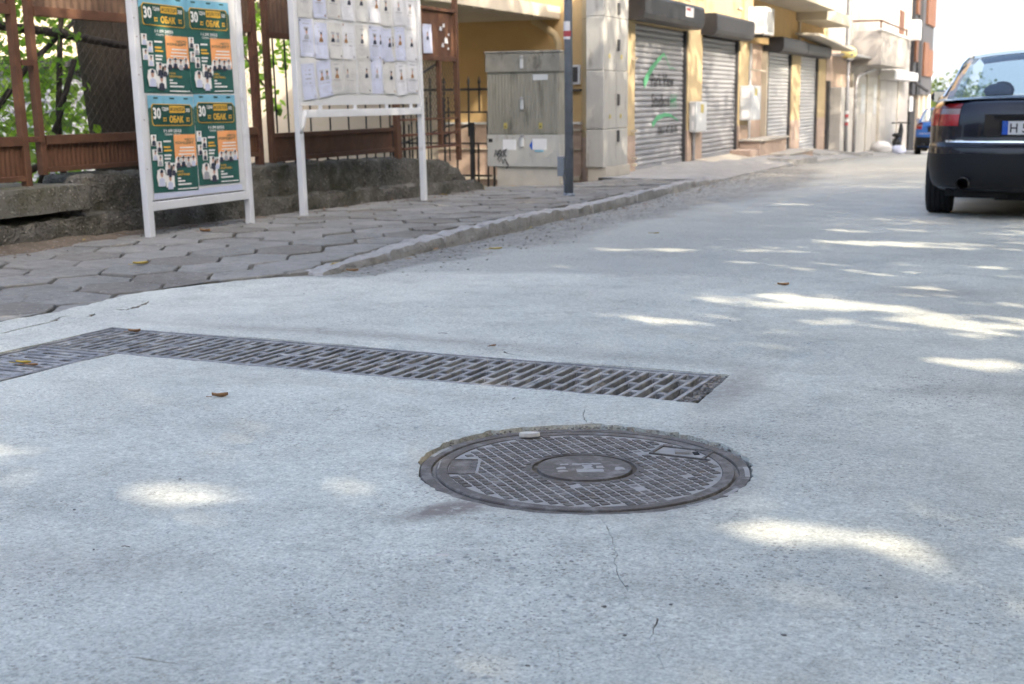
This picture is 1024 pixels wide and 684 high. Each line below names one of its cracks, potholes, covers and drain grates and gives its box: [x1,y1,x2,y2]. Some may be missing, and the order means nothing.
drain grate [38,328,723,403]
drain grate [0,346,113,382]
manhole cover [419,429,752,515]
